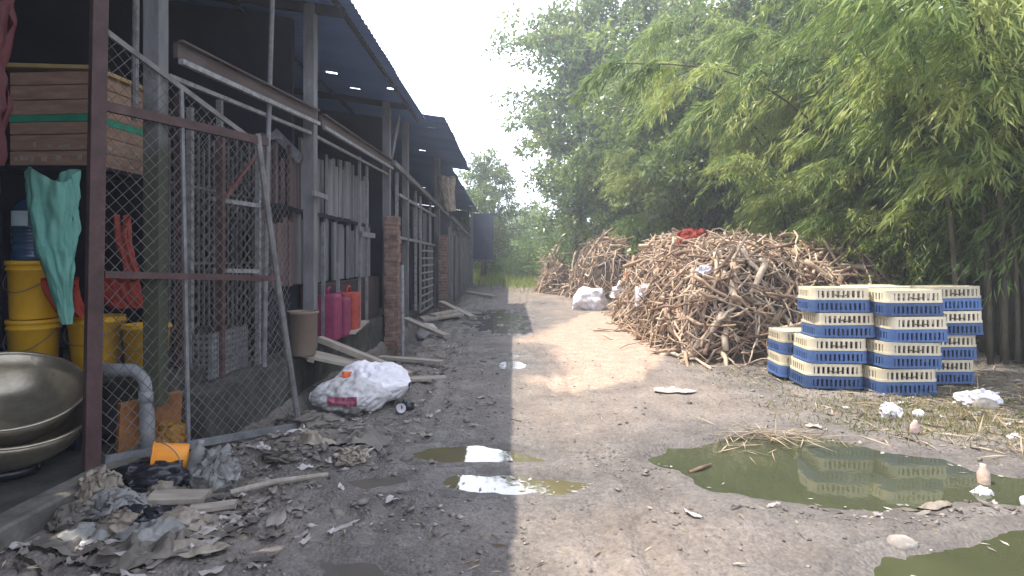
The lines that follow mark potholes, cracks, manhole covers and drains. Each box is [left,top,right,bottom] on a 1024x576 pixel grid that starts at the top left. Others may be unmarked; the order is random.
pothole [826,514,1024,576]
pothole [413,467,623,500]
pothole [623,427,1024,520]
pothole [399,438,563,468]
pothole [455,307,538,337]
